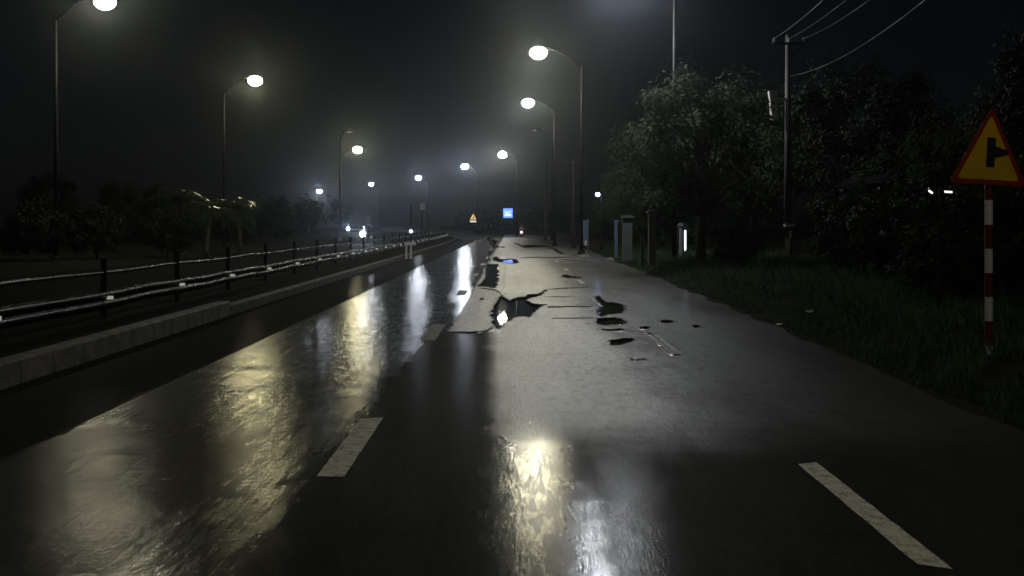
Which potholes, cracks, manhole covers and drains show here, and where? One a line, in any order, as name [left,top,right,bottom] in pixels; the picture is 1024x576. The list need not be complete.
pothole [588,317,631,326]
pothole [476,264,502,288]
pothole [599,337,641,346]
crack [546,287,594,319]
pothole [492,256,519,264]
pothole [486,289,550,329]
pothole [592,295,628,317]
